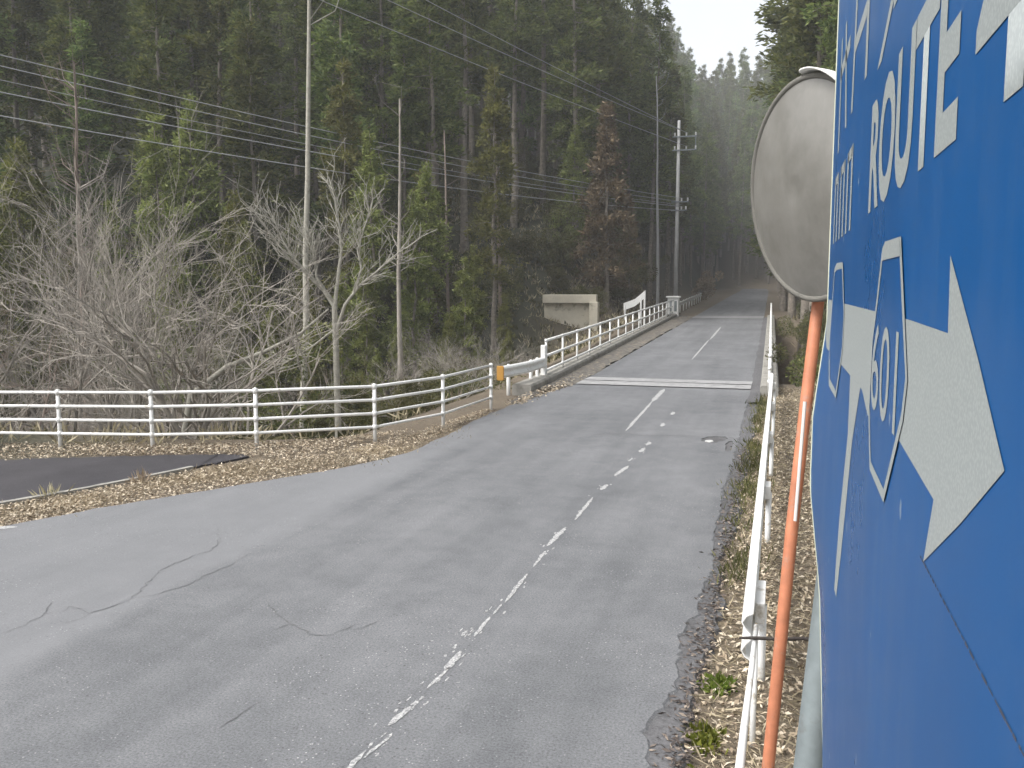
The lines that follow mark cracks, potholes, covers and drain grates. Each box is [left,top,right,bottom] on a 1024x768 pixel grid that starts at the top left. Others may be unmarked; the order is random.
crack [268,602,379,636]
crack [3,527,250,633]
